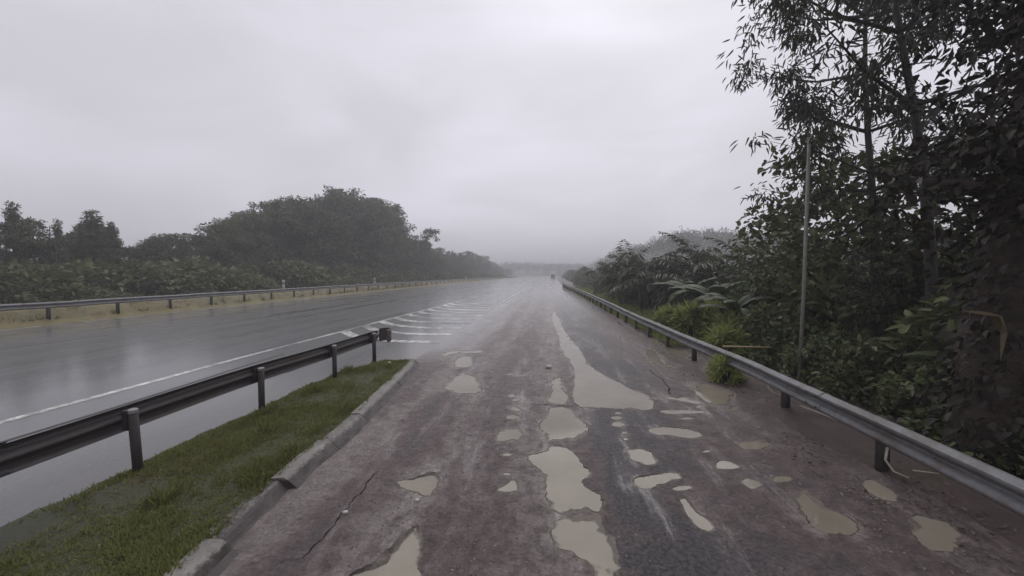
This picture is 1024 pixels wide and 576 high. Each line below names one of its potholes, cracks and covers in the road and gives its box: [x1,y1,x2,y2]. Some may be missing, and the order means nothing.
pothole [690,383,737,406]
pothole [545,377,570,404]
pothole [550,513,623,576]
pothole [349,517,423,576]
crack [302,472,377,559]
pothole [792,490,860,536]
pothole [397,471,441,497]
pothole [551,312,655,410]
pothole [861,479,900,502]
pothole [495,427,525,442]
pothole [907,514,965,553]
pothole [539,406,589,441]
